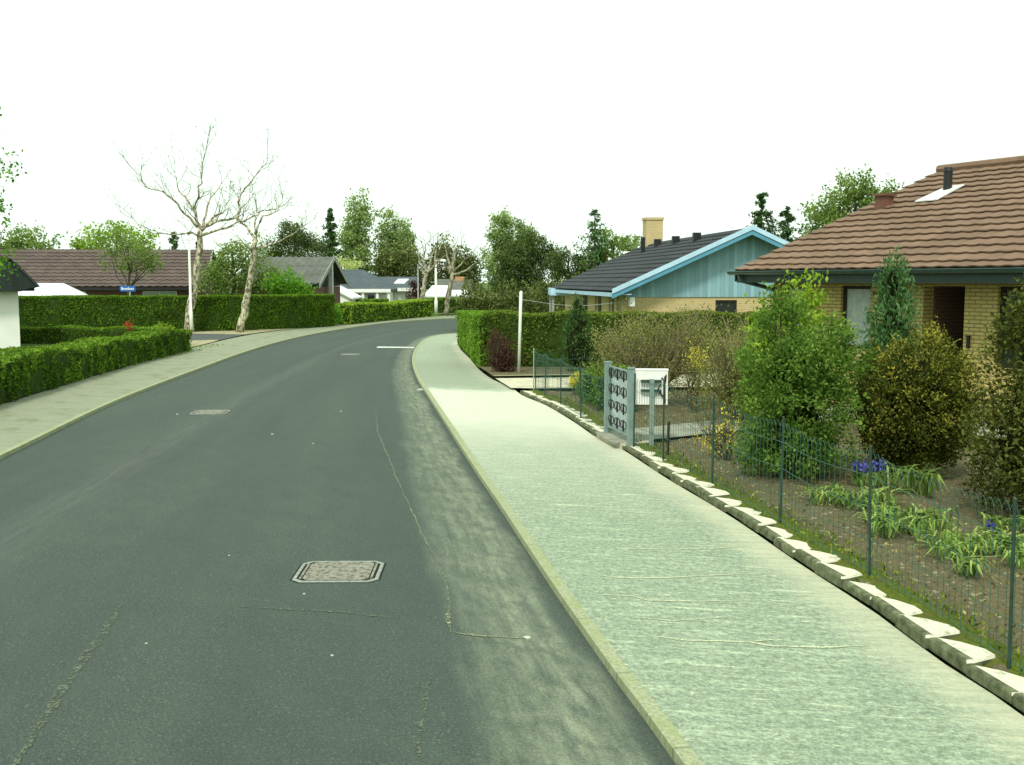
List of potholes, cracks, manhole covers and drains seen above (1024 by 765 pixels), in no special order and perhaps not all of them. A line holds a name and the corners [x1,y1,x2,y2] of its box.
crack [342,413,518,638]
crack [228,604,389,618]
crack [416,669,433,765]
manhole cover [290,561,386,583]
crack [12,601,125,765]
